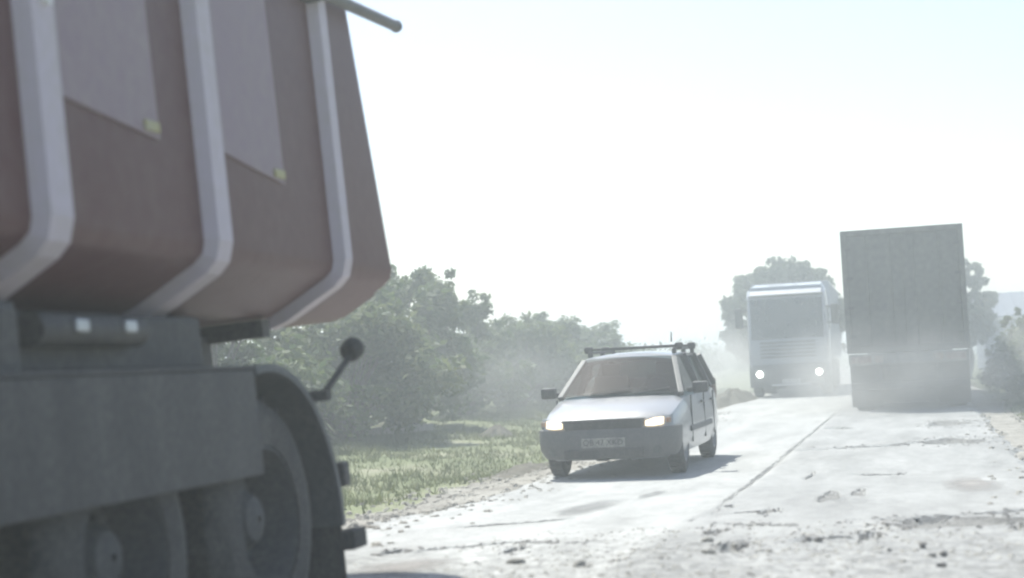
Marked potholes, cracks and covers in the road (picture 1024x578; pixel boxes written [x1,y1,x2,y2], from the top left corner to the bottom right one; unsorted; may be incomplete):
crack [687,411,927,542]
crack [888,509,1024,527]
crack [417,519,569,552]
